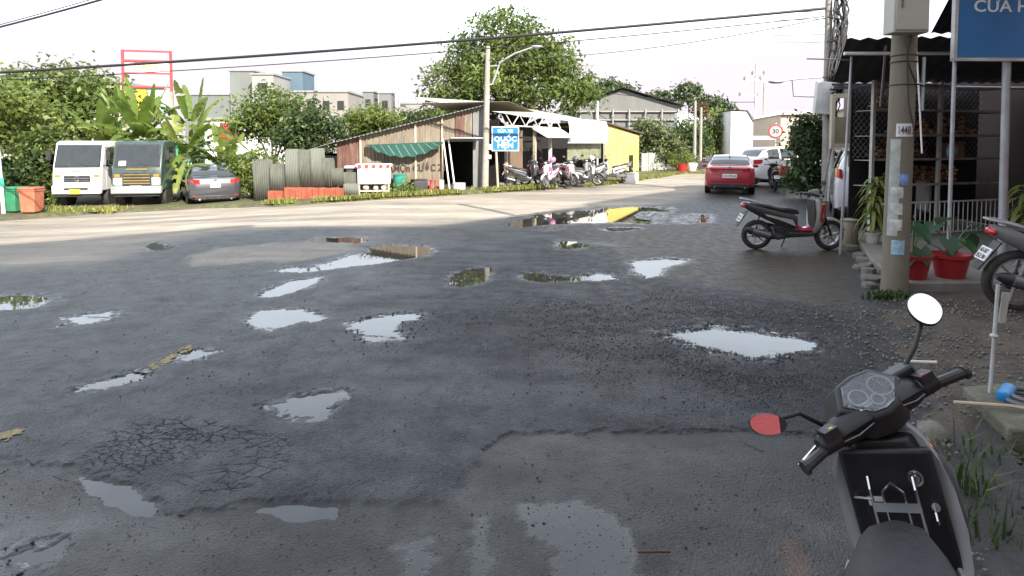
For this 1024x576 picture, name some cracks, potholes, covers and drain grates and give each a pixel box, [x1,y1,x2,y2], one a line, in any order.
crack [474,414,838,470]
pothole [131,340,249,373]
pothole [0,288,87,316]
pothole [621,315,874,378]
crack [19,405,324,516]
pothole [650,211,735,228]
pothole [247,241,455,277]
pothole [0,511,129,576]
pothole [234,273,343,303]
pothole [609,254,708,282]
pothole [465,203,701,234]
